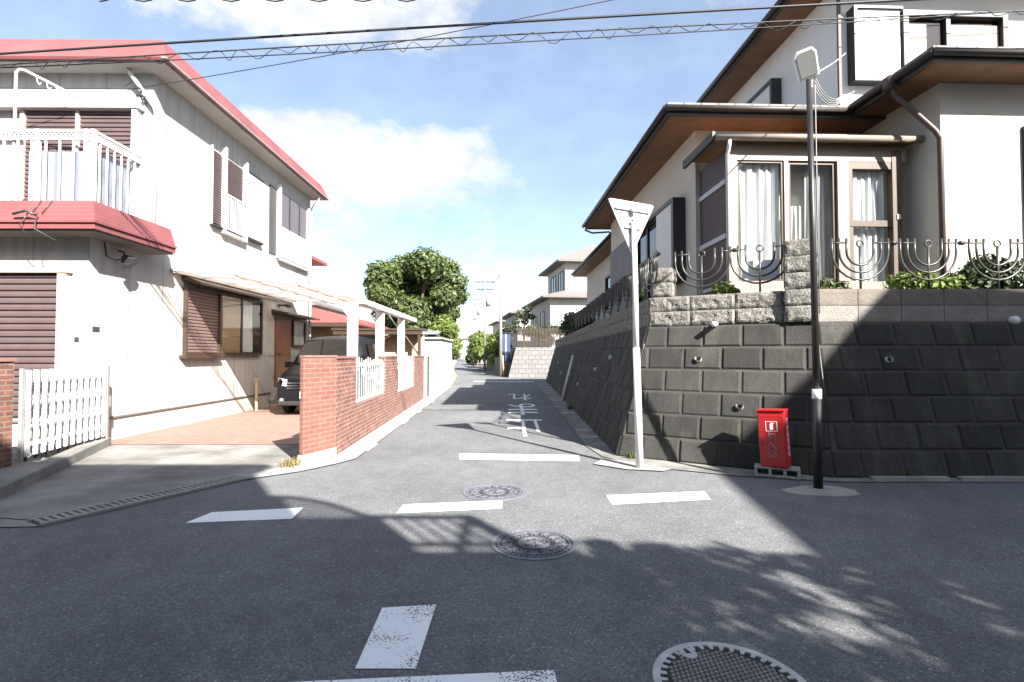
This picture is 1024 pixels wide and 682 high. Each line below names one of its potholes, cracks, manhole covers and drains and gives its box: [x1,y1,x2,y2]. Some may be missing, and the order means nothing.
manhole cover [652,642,807,682]
drain grate [28,474,251,527]
manhole cover [463,484,526,501]
manhole cover [491,528,577,561]
